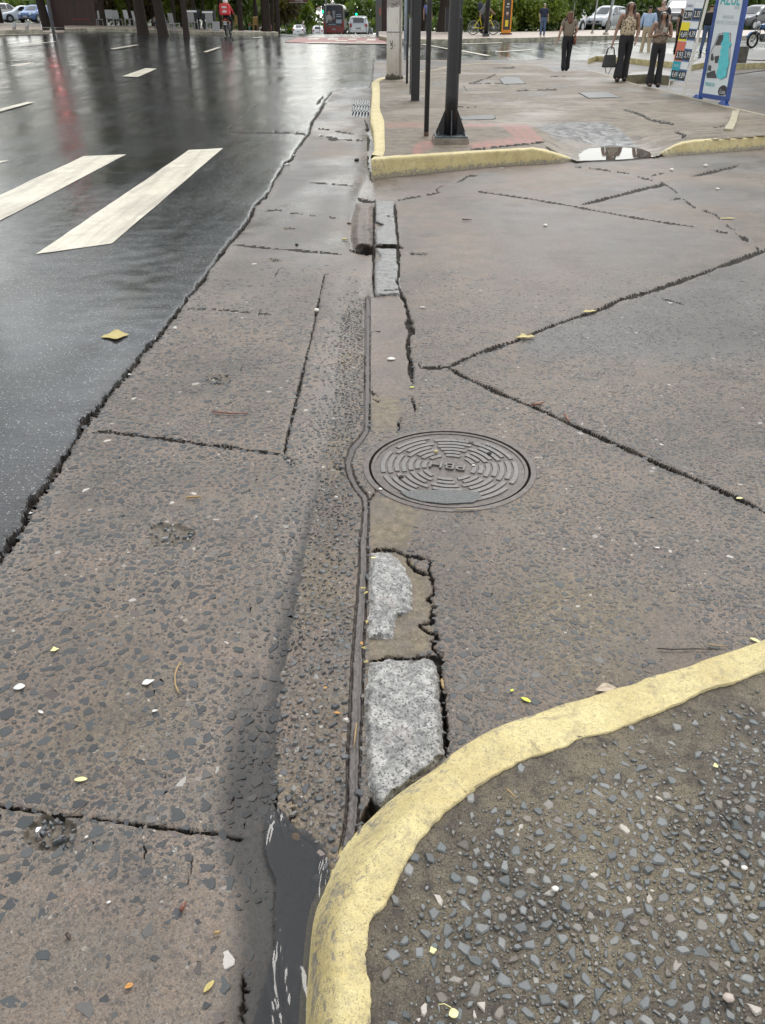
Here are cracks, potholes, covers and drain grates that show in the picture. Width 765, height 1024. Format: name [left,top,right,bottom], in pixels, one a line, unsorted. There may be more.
pothole [149,521,195,547]
drain grate [351,100,370,118]
manhole cover [363,428,537,512]
crack [372,173,760,431]
pothole [23,814,77,852]
crack [373,548,450,758]
crack [0,92,373,563]
